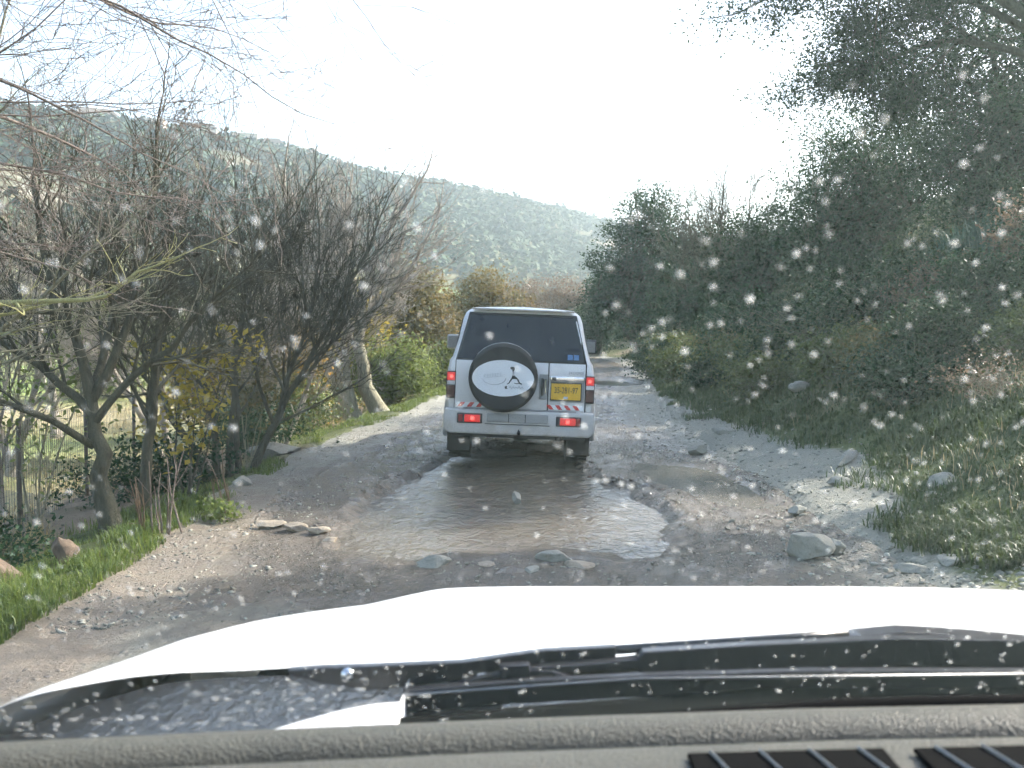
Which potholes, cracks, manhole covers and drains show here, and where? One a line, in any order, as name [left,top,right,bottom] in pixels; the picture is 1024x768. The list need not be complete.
pothole [309,439,717,566]
